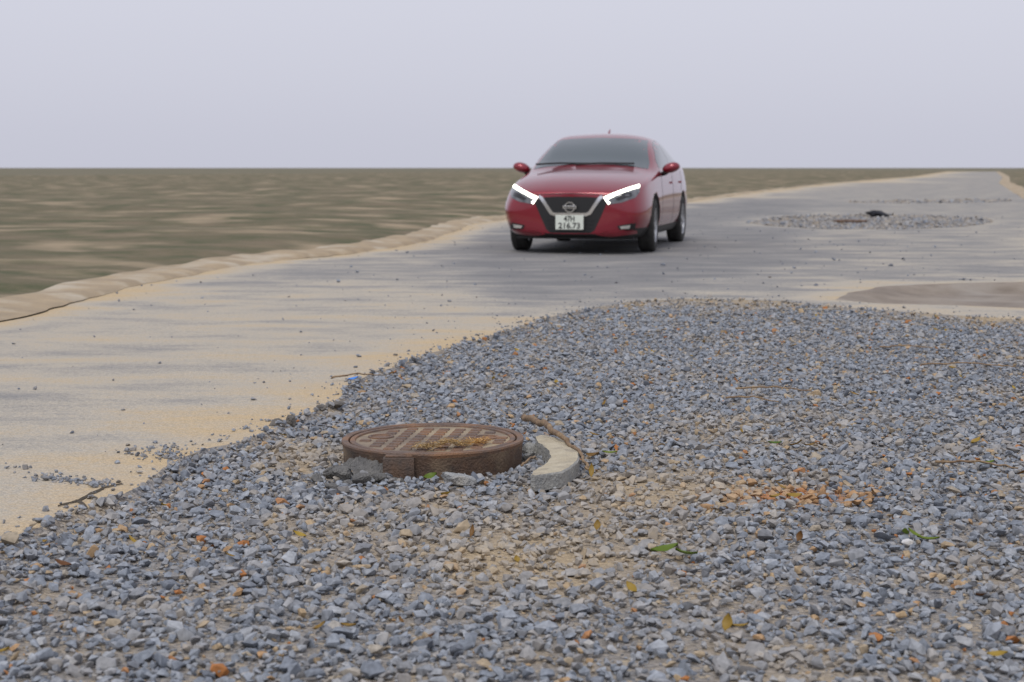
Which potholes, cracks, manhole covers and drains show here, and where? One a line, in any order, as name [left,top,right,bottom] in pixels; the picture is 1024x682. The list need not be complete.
manhole cover [341,423,524,480]
pothole [759,215,992,228]
